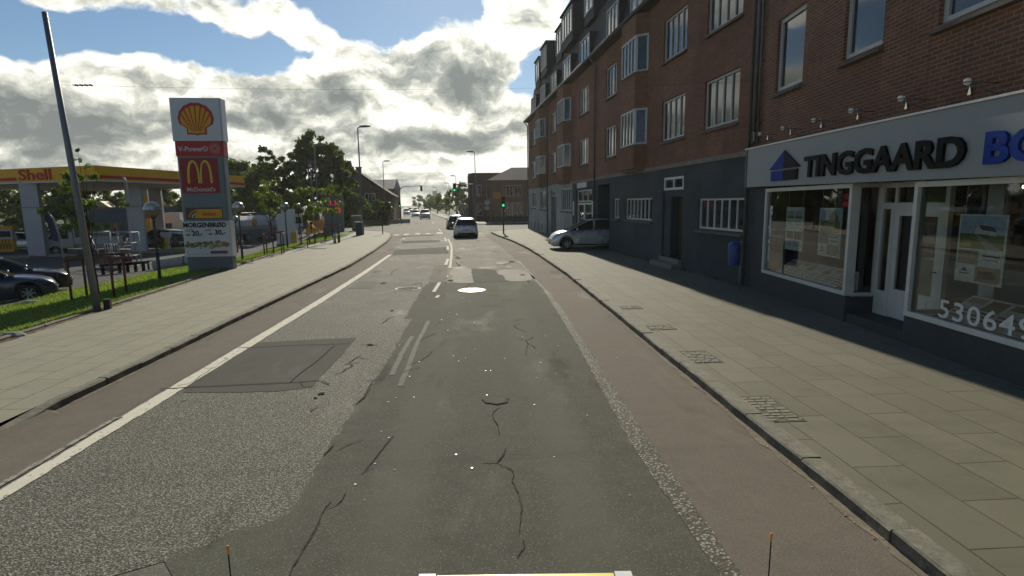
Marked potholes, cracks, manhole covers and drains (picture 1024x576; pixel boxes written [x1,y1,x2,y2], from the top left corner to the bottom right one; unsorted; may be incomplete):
crack [492,407,525,557]
crack [323,435,394,508]
crack [337,344,378,405]
